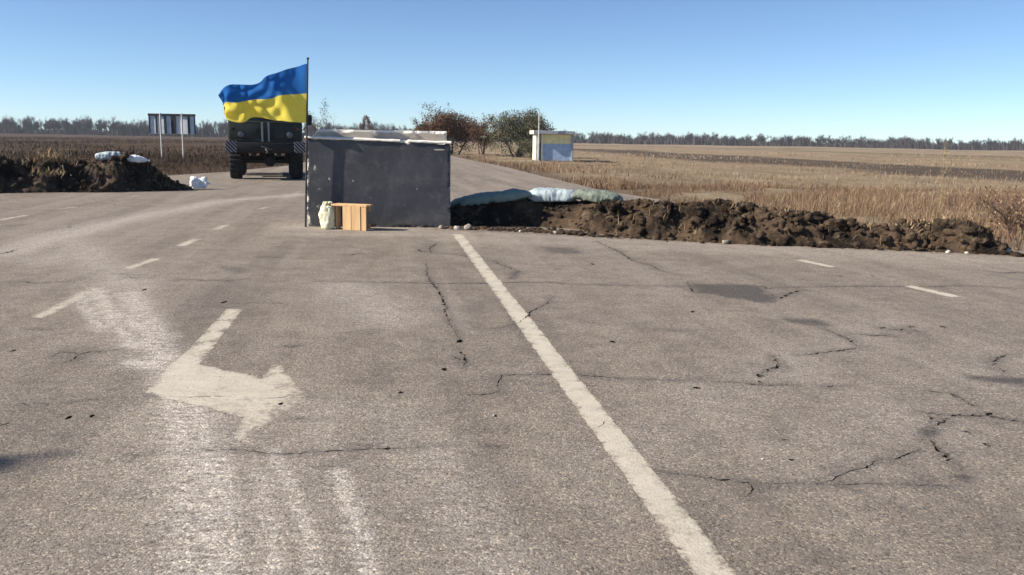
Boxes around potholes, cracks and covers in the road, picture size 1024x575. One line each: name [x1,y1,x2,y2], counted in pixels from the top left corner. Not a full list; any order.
crack [474,374,684,395]
crack [657,391,1019,496]
crack [338,244,984,367]
crack [734,356,846,387]
crack [214,445,492,467]
